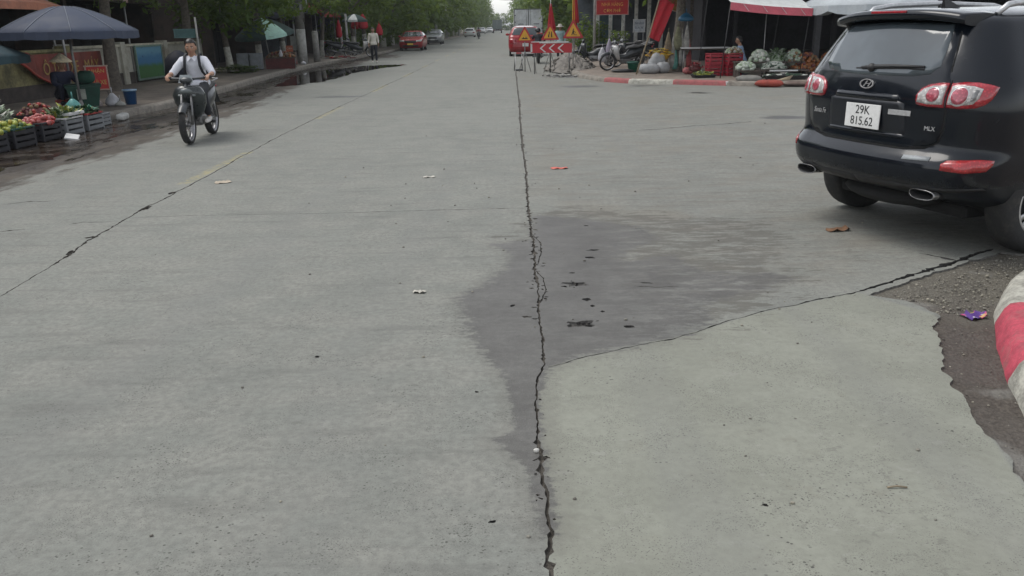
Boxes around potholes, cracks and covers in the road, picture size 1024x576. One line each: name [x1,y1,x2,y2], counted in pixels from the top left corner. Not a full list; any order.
crack [550,249,993,367]
